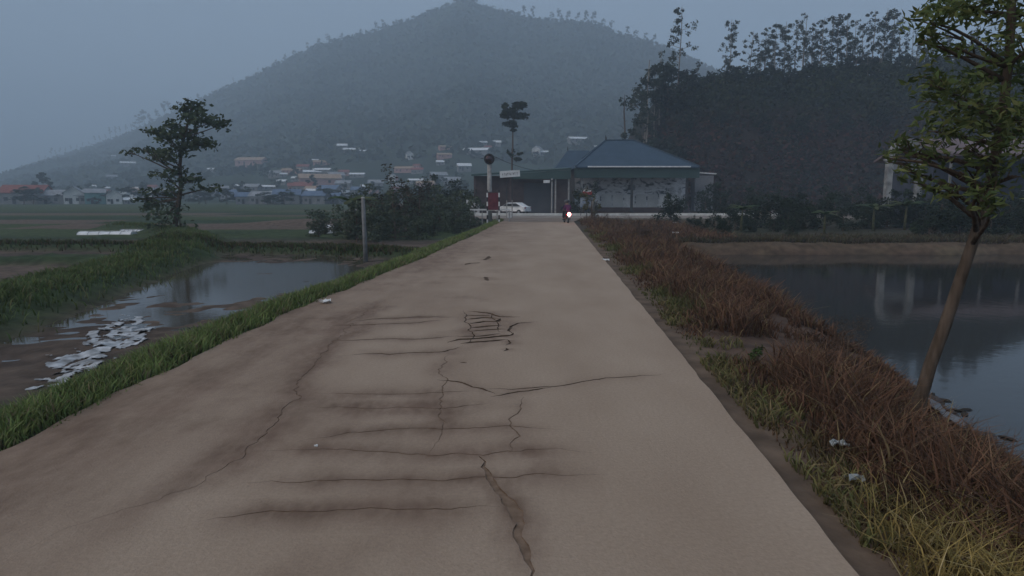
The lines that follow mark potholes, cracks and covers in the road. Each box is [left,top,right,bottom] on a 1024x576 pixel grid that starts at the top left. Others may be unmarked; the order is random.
crack [150,305,661,576]
